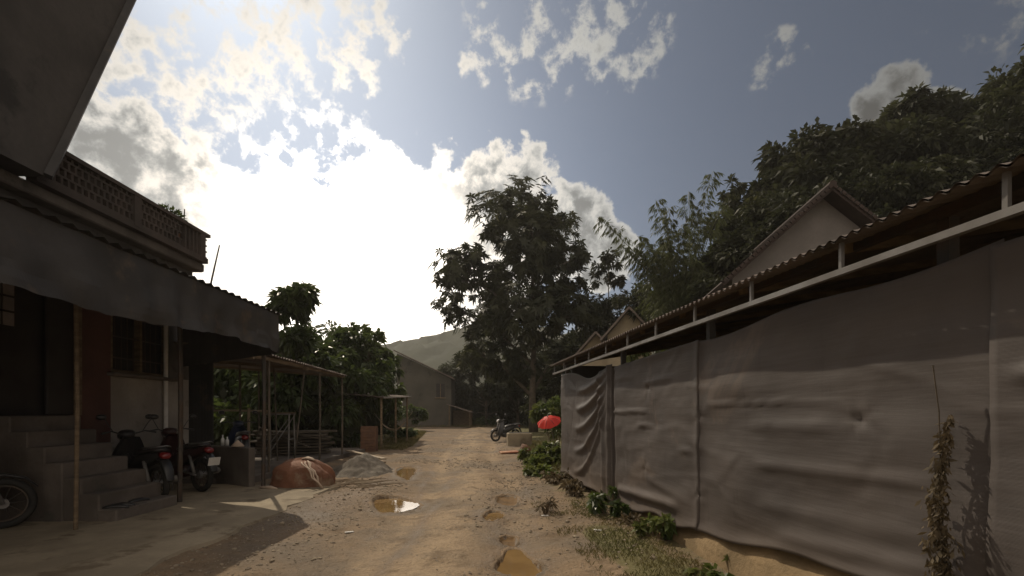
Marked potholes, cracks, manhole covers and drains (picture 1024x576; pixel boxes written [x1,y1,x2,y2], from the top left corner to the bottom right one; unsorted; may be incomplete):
pothole [368,494,424,514]
pothole [394,464,418,481]
pothole [496,534,520,547]
pothole [480,510,507,522]
pothole [490,546,549,576]
pothole [493,493,521,508]
